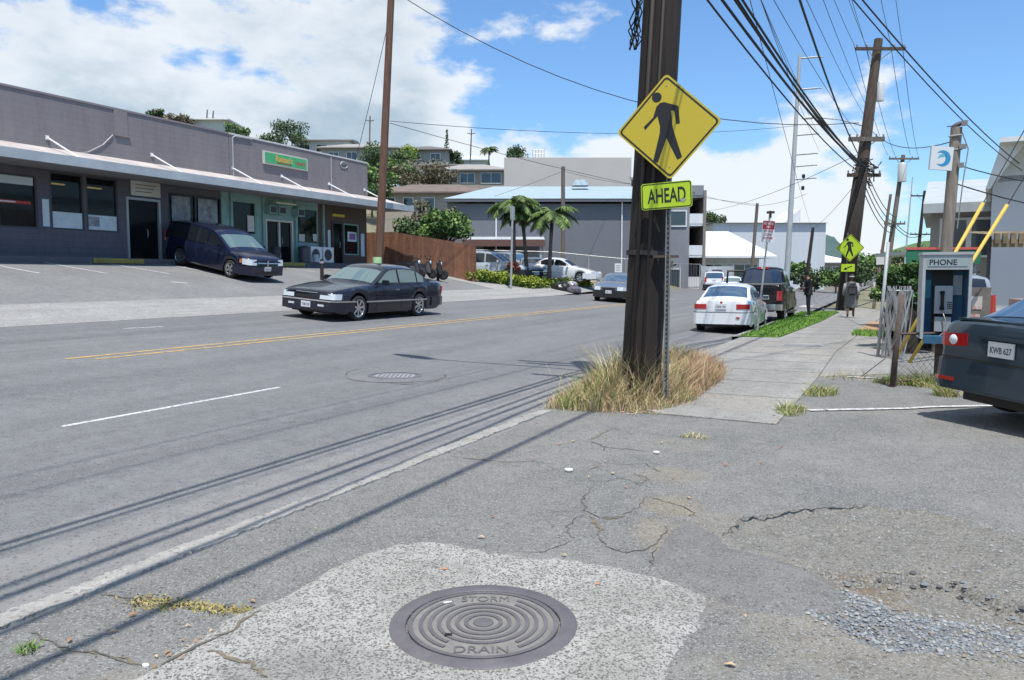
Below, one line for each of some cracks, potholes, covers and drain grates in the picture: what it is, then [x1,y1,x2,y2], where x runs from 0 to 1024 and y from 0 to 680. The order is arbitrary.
crack [24,610,268,677]
crack [521,428,699,571]
manhole cover [389,585,578,670]
